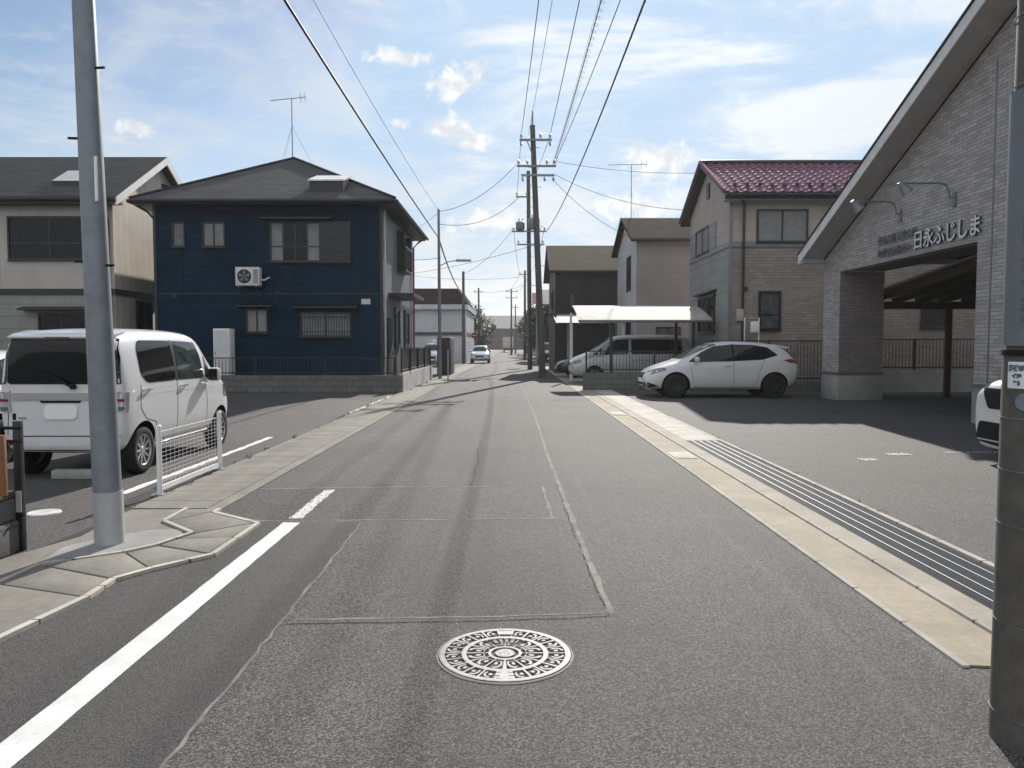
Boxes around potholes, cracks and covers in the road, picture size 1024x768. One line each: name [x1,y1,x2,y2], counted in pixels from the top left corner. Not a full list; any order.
manhole cover [436,629,574,685]
drain grate [687,440,735,450]
drain grate [803,504,908,530]
drain grate [769,485,855,505]
crack [470,444,482,485]
drain grate [908,562,994,610]
drain grate [720,459,783,472]
drain grate [849,529,979,564]
drain grate [742,471,815,487]
drain grate [702,449,756,460]
